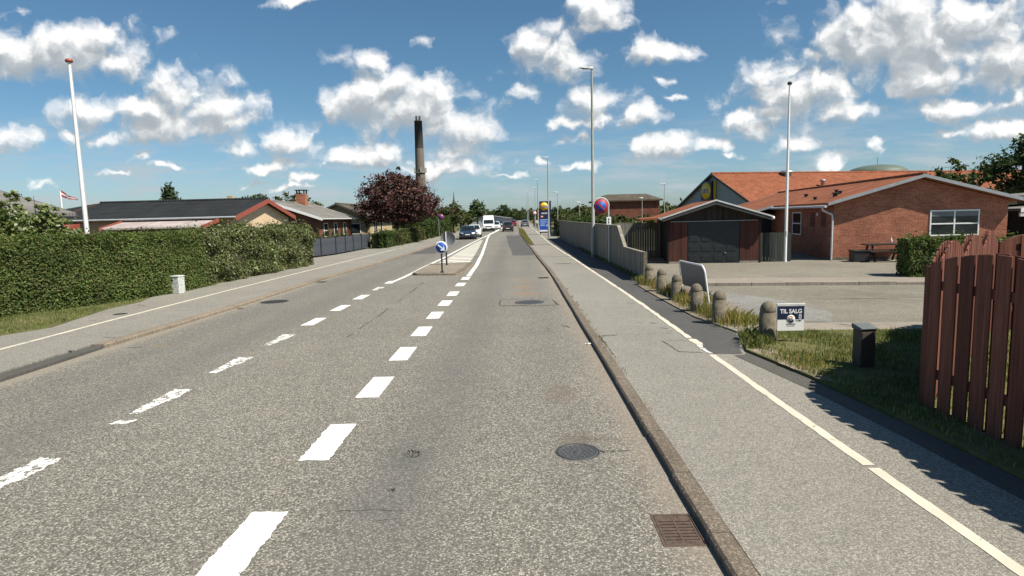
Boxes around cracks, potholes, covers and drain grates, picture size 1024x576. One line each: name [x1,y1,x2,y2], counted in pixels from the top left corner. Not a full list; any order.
manhole cover [556,443,600,461]
pothole [403,449,422,458]
drain grate [650,513,709,547]
